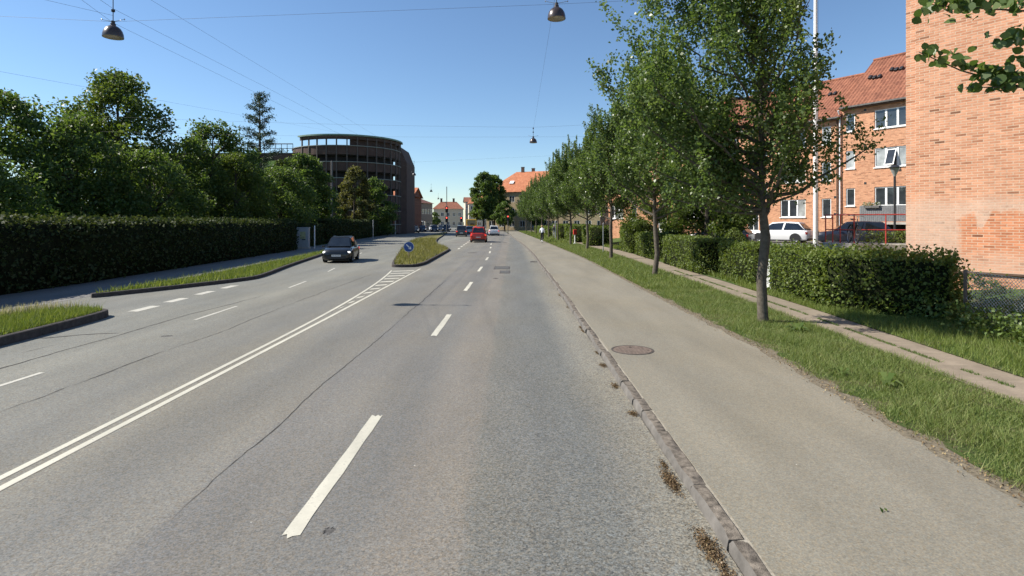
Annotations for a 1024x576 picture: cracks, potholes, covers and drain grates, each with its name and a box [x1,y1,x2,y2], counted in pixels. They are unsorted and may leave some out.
manhole cover [611,345,654,355]
